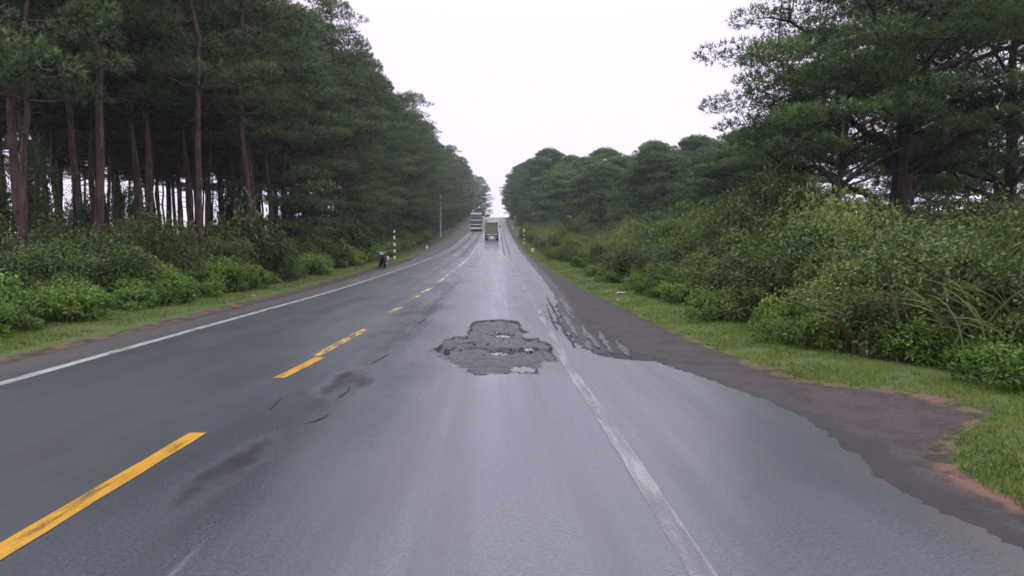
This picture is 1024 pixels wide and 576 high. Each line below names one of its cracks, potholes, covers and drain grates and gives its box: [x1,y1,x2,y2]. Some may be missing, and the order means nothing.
pothole [429,319,561,375]
crack [545,295,575,347]
